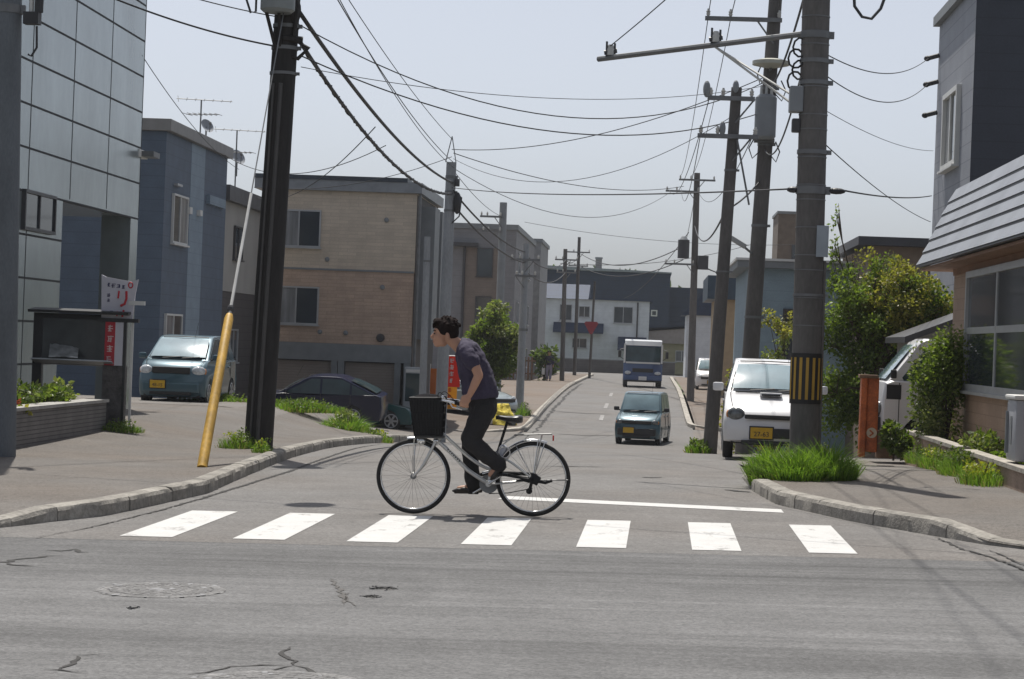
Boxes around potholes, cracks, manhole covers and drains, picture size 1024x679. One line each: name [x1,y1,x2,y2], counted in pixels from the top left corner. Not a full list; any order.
manhole cover [93,582,226,598]
crack [52,654,99,673]
crack [3,549,81,566]
crack [330,578,356,606]
crack [938,537,1024,570]
crack [190,647,316,674]
